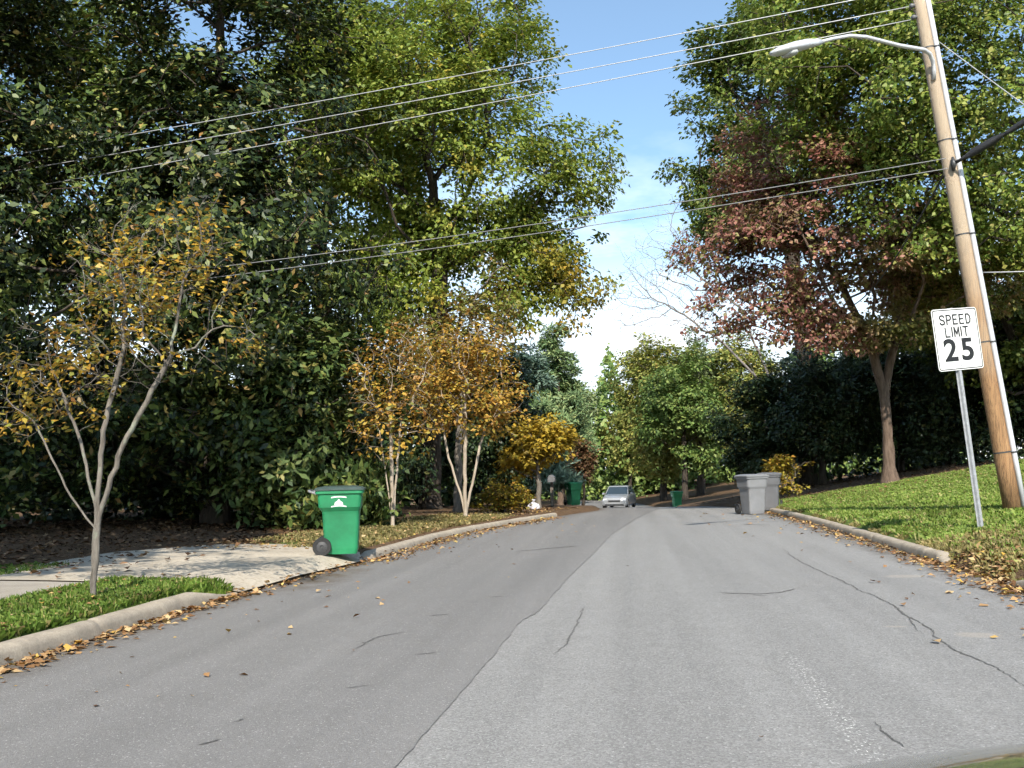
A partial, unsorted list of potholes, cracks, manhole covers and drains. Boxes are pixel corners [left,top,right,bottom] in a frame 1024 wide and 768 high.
crack [785,550,1022,684]
